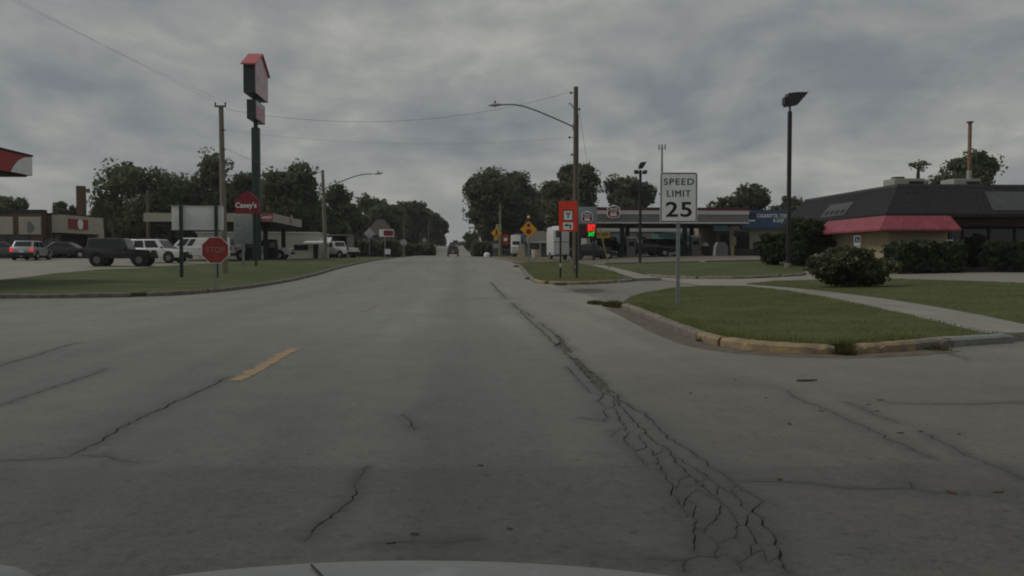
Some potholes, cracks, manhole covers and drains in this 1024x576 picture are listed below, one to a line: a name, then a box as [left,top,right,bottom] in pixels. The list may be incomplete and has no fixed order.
crack [784,389,1023,479]
crack [5,378,227,463]
crack [307,467,368,539]
crack [490,282,965,573]
